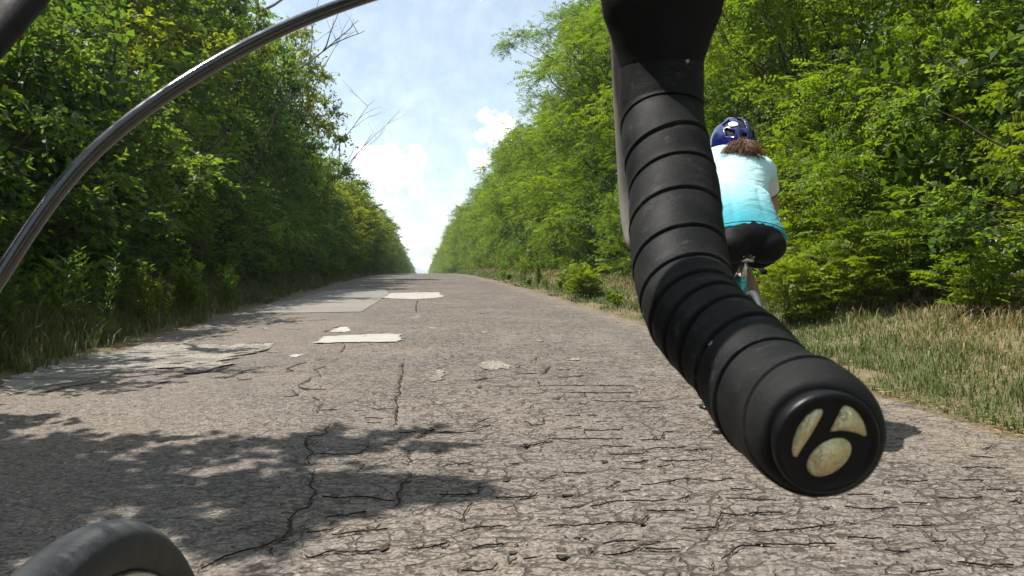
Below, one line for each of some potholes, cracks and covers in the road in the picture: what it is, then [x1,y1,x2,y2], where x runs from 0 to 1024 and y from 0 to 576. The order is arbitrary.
crack [46,382,98,392]
crack [412,472,586,572]
crack [510,354,1023,572]
crack [186,326,491,569]
